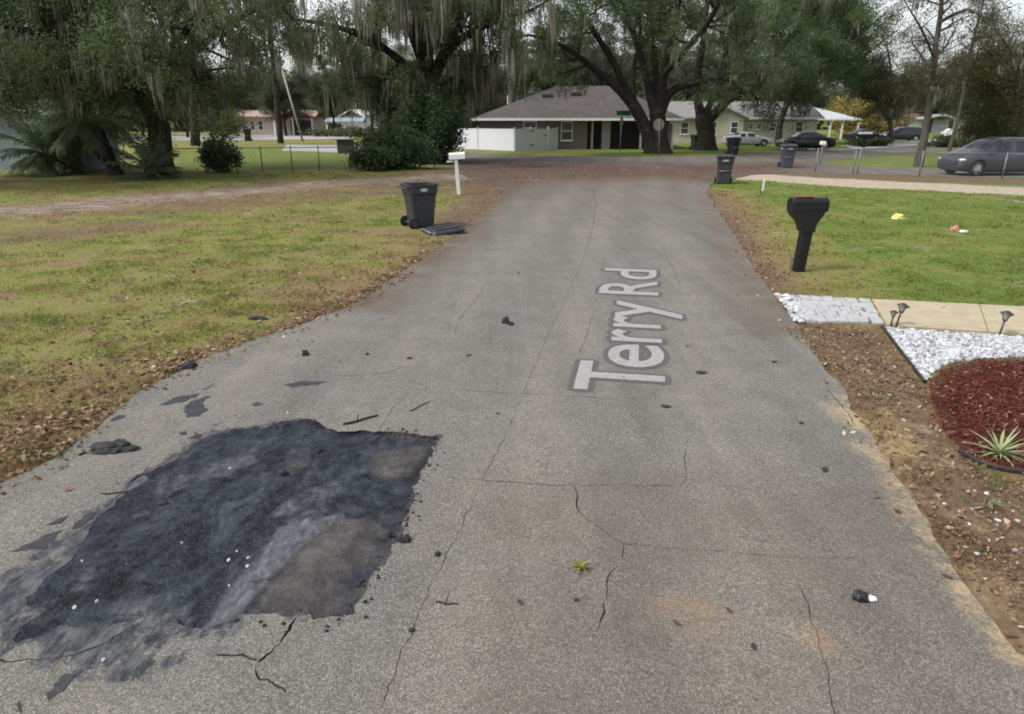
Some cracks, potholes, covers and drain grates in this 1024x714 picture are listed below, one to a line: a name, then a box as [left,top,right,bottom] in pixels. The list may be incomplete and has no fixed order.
crack [217,619,296,692]
crack [798,584,835,714]
crack [447,439,859,630]
